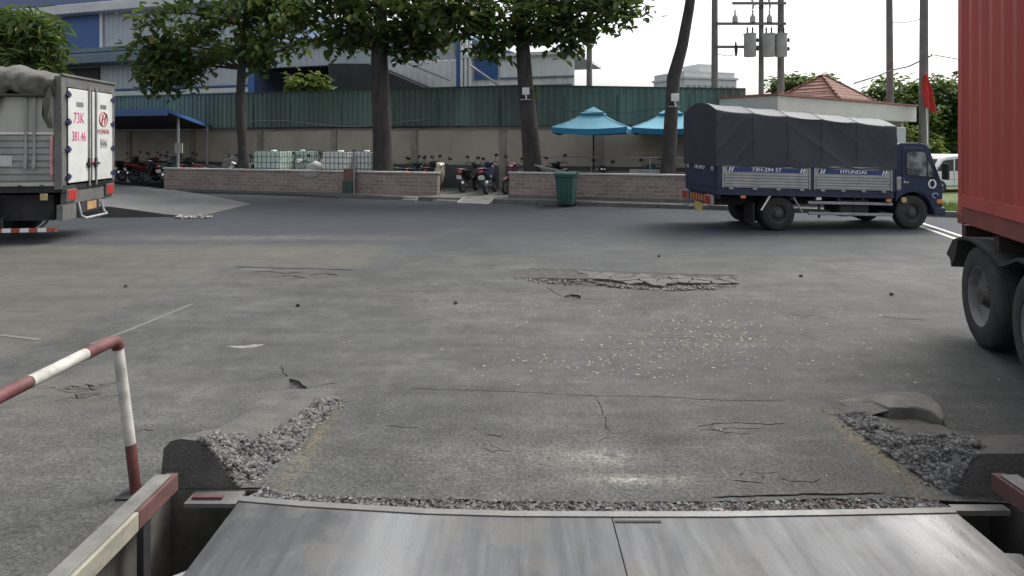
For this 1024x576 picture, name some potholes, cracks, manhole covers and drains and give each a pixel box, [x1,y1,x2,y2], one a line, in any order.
crack [415,388,757,441]
crack [238,266,346,278]
pothole [507,269,739,291]
crack [10,384,118,404]
crack [698,422,785,435]
